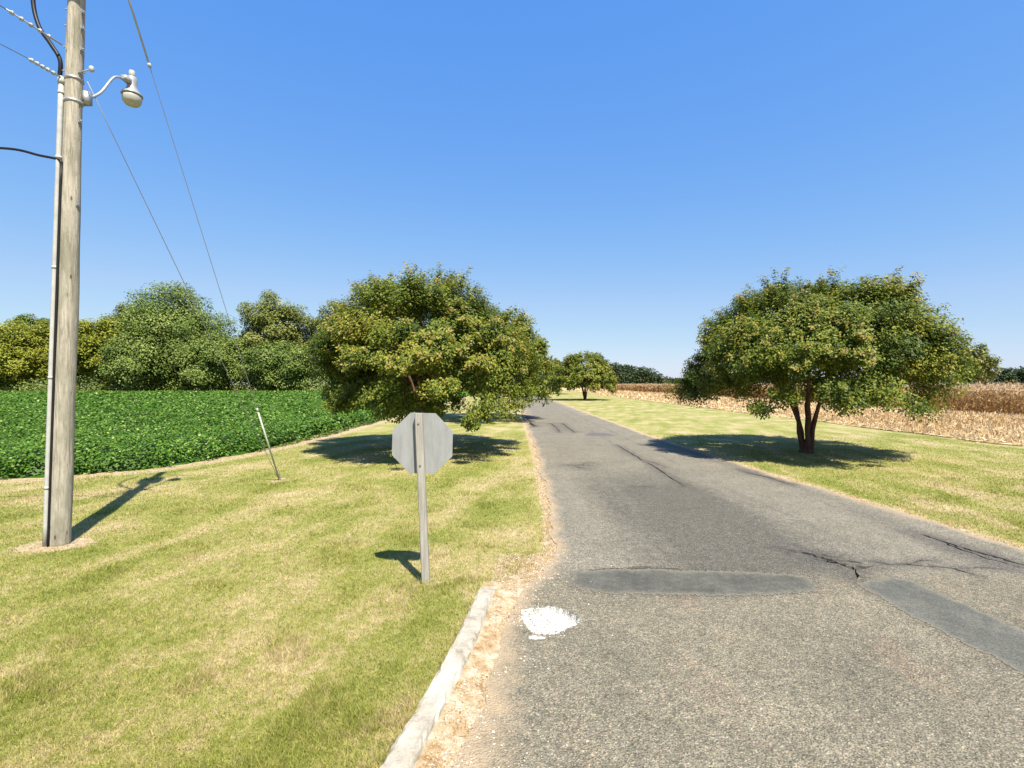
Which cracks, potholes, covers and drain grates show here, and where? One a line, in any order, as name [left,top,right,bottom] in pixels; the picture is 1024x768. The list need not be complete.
crack [780,534,1024,579]
